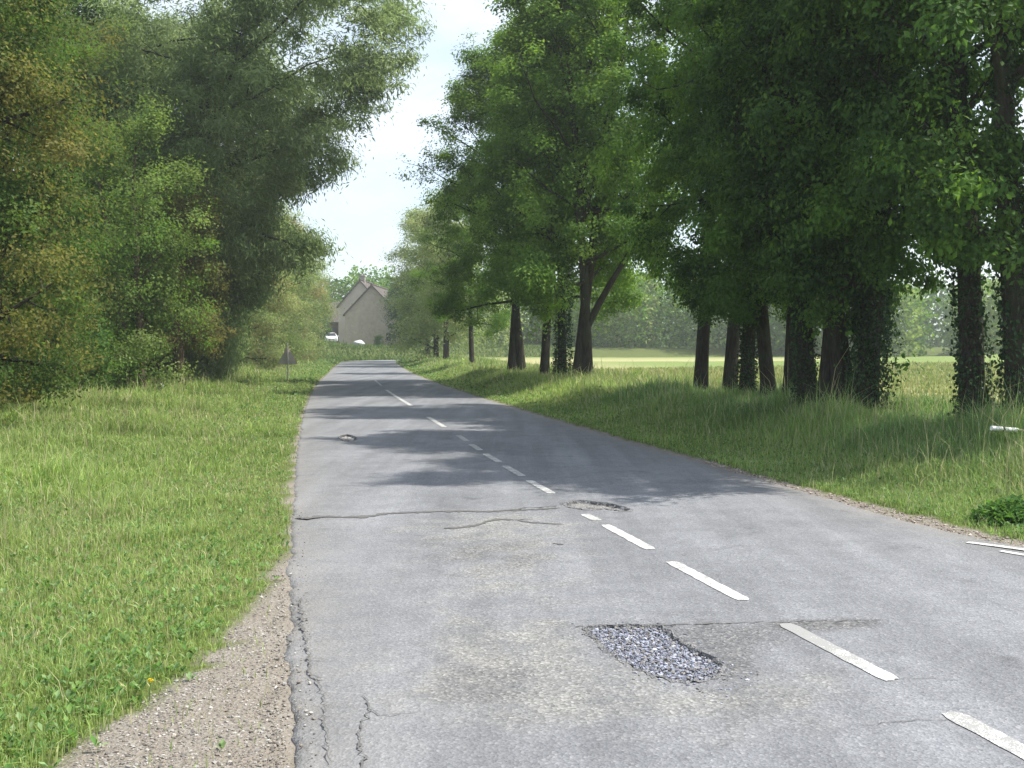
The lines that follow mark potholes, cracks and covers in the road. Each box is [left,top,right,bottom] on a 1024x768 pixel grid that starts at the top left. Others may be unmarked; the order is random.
pothole [571,618,768,704]
crack [298,597,336,764]
crack [297,505,561,529]
pothole [559,500,633,512]
